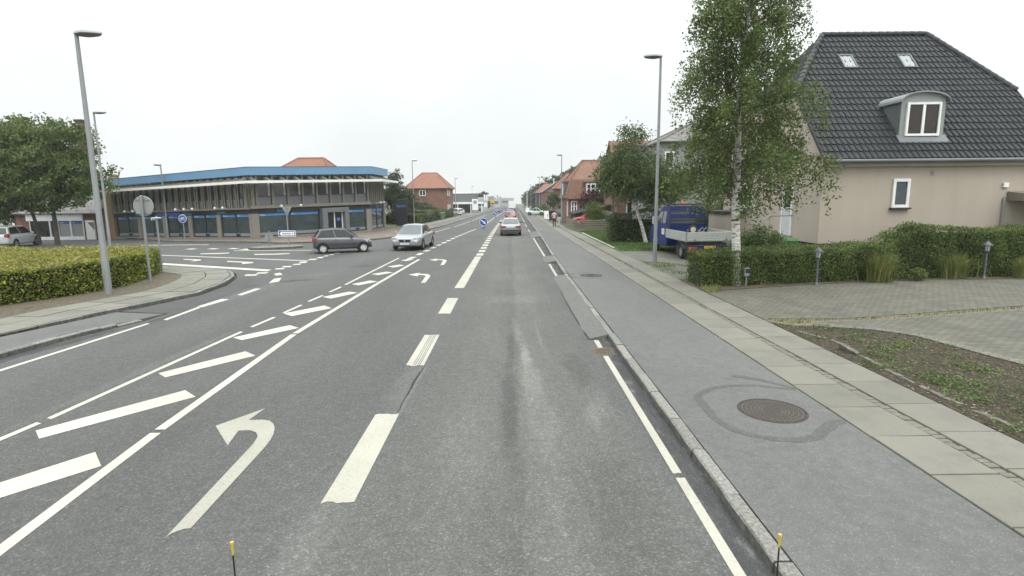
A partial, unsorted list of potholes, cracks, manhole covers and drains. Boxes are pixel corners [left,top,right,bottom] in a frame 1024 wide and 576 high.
manhole cover [737,399,809,423]
crack [398,366,428,412]
